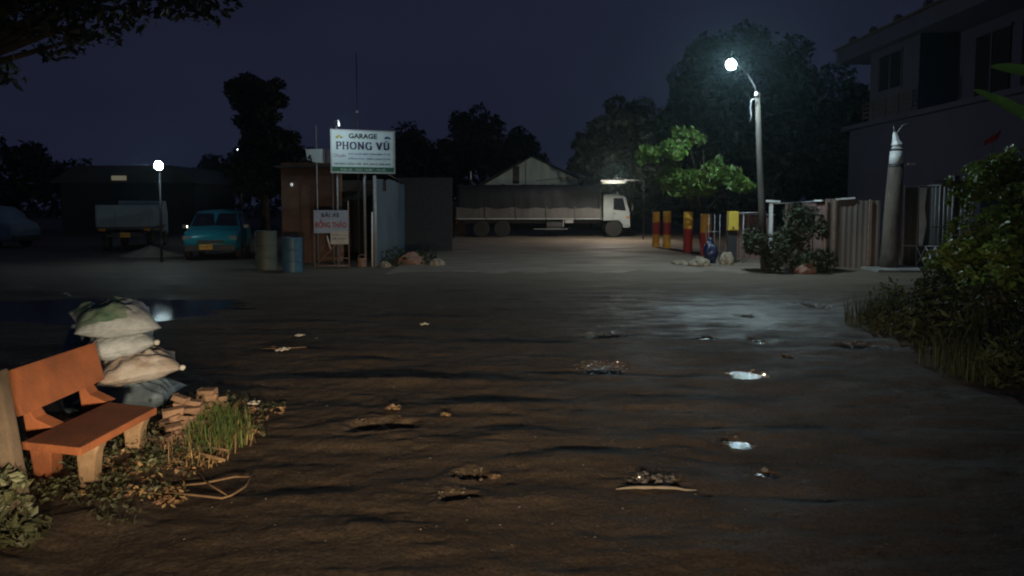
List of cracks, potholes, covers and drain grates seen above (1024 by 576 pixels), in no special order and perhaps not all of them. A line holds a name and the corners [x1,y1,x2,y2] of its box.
pothole [600,467,699,494]
pothole [739,467,796,482]
pothole [563,359,643,376]
pothole [708,433,767,454]
pothole [827,339,893,350]
pothole [717,367,778,381]
pothole [328,413,438,436]
pothole [772,351,802,362]
pothole [437,462,504,486]
pothole [568,331,637,341]
pothole [739,334,775,347]
pothole [422,485,497,507]
